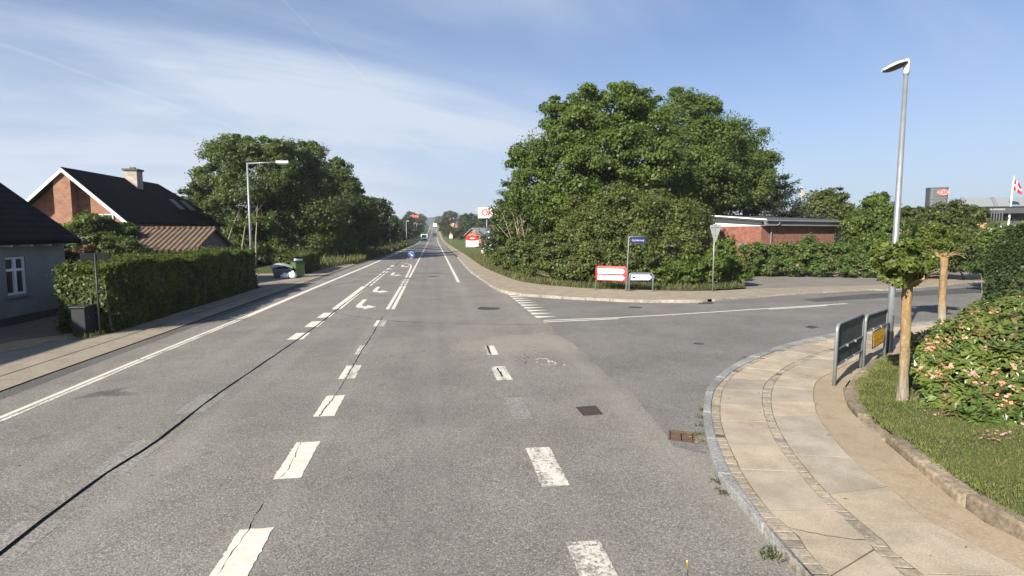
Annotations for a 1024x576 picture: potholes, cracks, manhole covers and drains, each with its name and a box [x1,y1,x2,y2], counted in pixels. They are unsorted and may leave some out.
drain grate [668,430,695,443]
